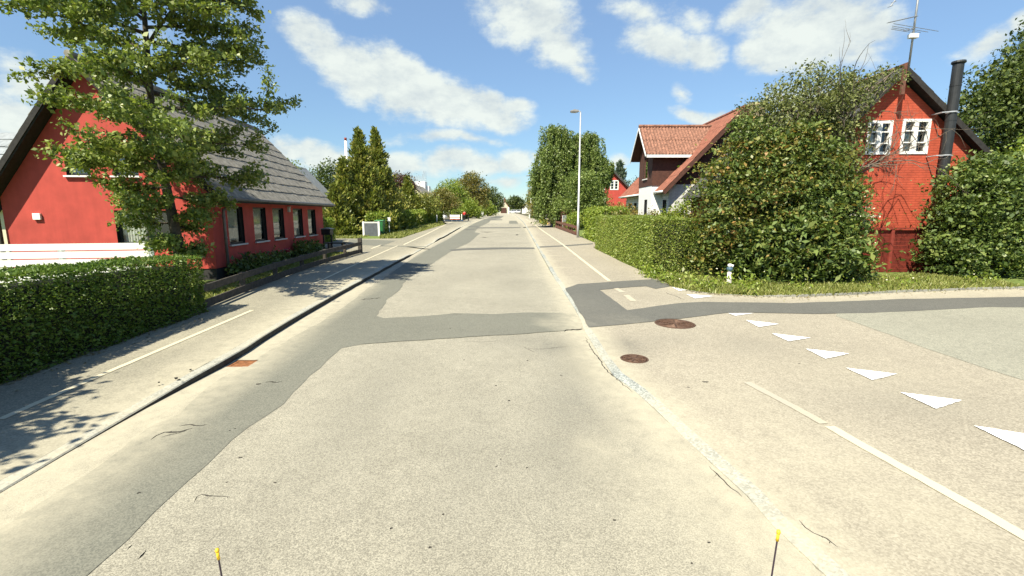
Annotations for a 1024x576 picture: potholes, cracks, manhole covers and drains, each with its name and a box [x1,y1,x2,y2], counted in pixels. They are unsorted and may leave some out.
crack [152,424,206,439]
manhole cover [620,354,649,363]
manhole cover [655,319,696,329]
